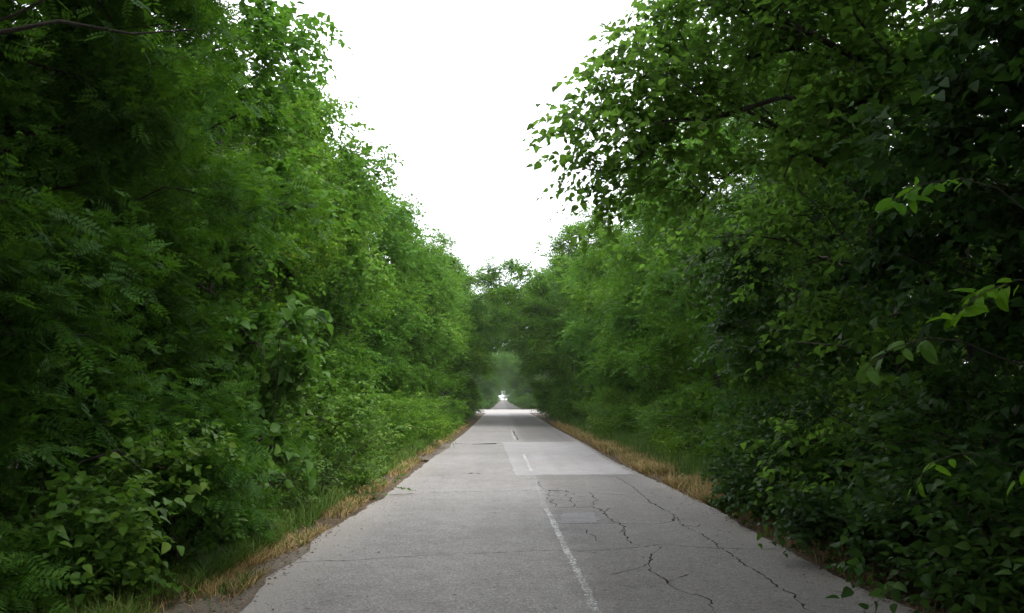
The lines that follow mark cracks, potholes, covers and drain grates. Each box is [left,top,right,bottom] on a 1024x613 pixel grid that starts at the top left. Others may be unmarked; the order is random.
crack [289,476,815,613]
